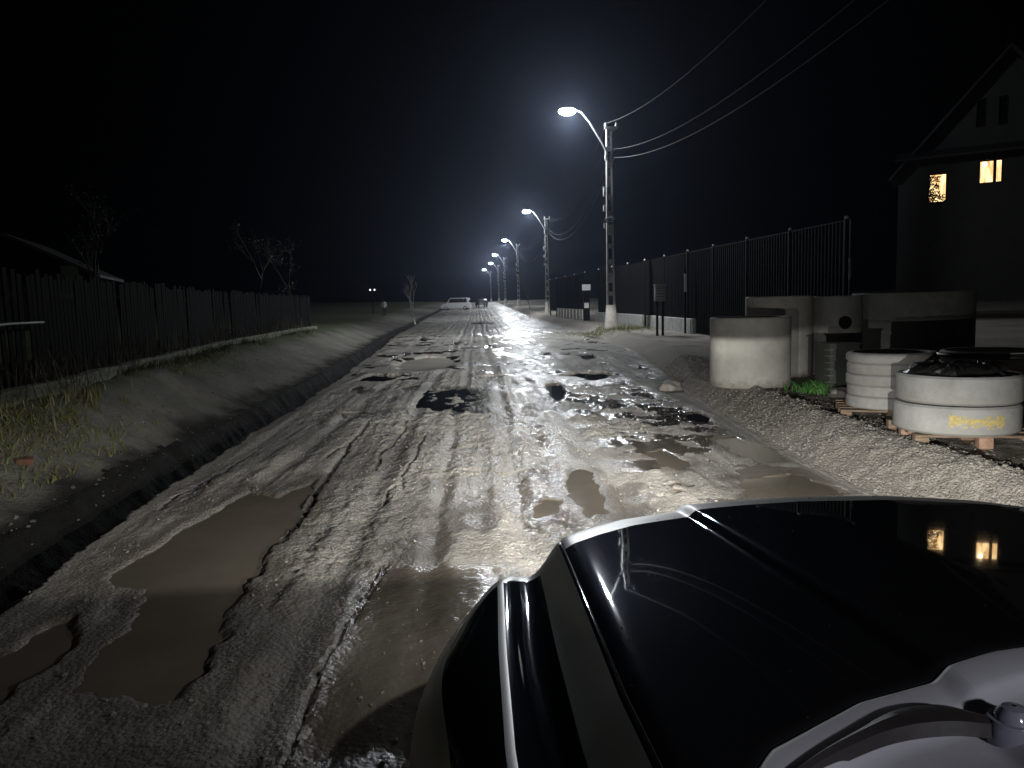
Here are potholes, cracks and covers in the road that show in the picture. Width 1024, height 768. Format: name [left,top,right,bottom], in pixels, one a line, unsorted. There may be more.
pothole [388,355,464,371]
pothole [544,384,566,404]
pothole [411,386,493,418]
pothole [353,373,400,381]
pothole [71,478,318,707]
pothole [379,351,446,363]
pothole [685,411,711,423]
pothole [531,497,567,518]
pothole [564,468,617,517]
pothole [0,613,84,706]
pothole [647,448,693,470]
crack [285,410,429,542]
